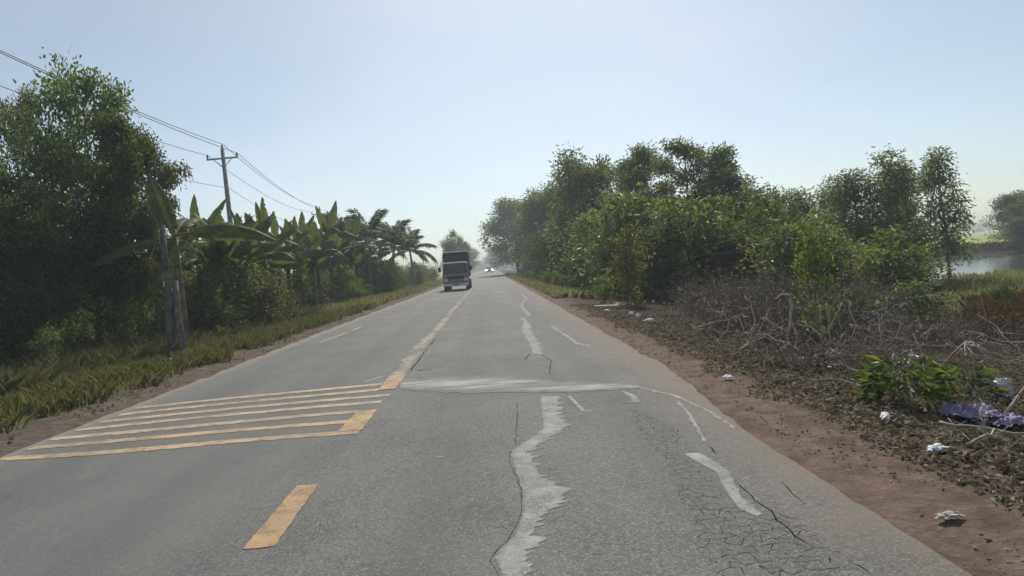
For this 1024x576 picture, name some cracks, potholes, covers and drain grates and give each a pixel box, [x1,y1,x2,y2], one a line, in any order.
crack [489,396,593,576]
crack [622,385,871,576]
crack [366,291,591,374]
